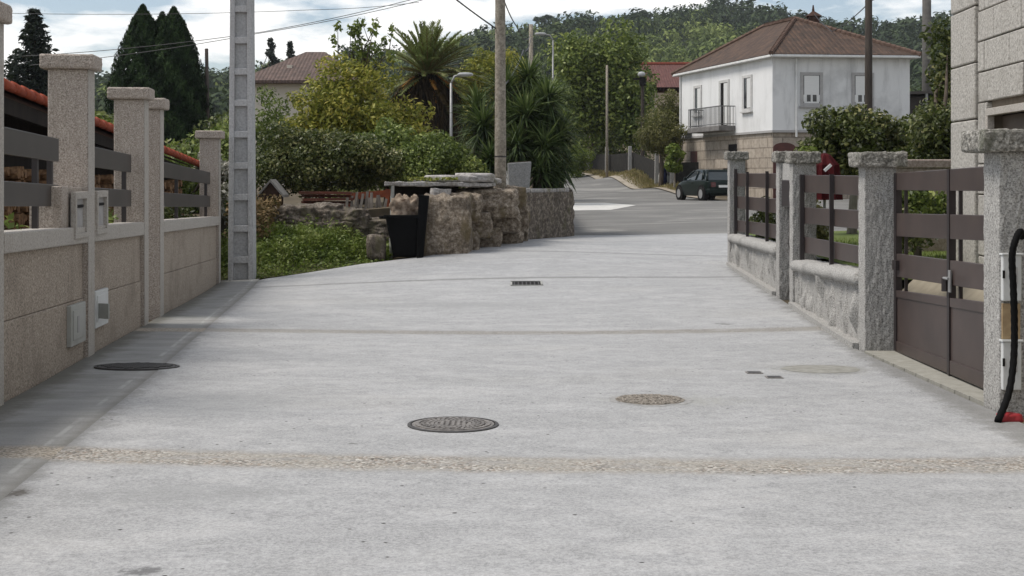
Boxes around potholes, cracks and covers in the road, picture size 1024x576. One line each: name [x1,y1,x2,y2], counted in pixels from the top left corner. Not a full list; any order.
manhole cover [609,394,694,407]
manhole cover [407,416,499,433]
manhole cover [94,362,180,371]
